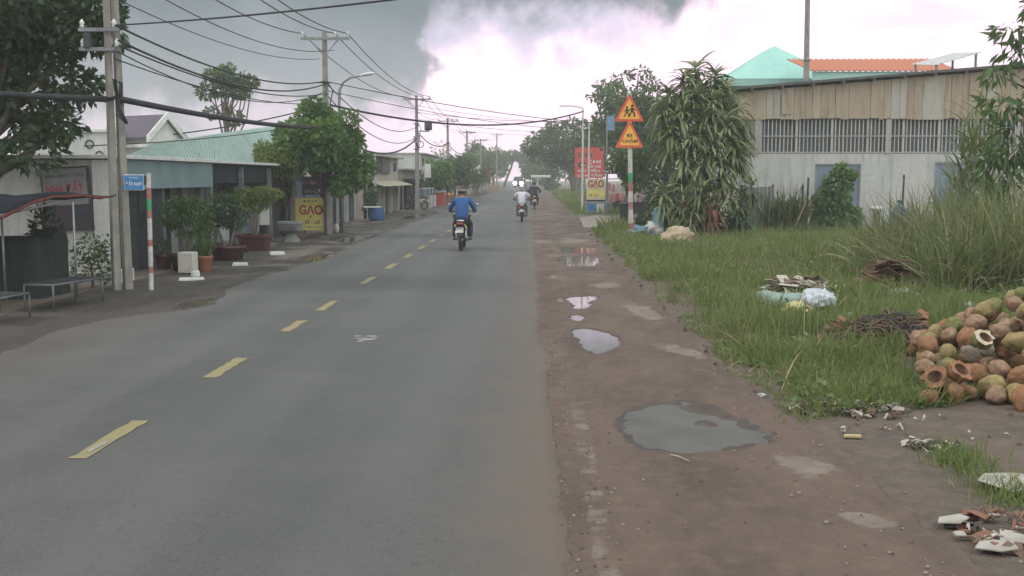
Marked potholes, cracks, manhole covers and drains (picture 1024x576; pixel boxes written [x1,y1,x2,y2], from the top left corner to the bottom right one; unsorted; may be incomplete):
pothole [170,296,216,310]
pothole [612,399,779,455]
pothole [304,253,329,261]
pothole [569,327,624,353]
pothole [558,256,601,266]
pothole [564,295,602,309]
